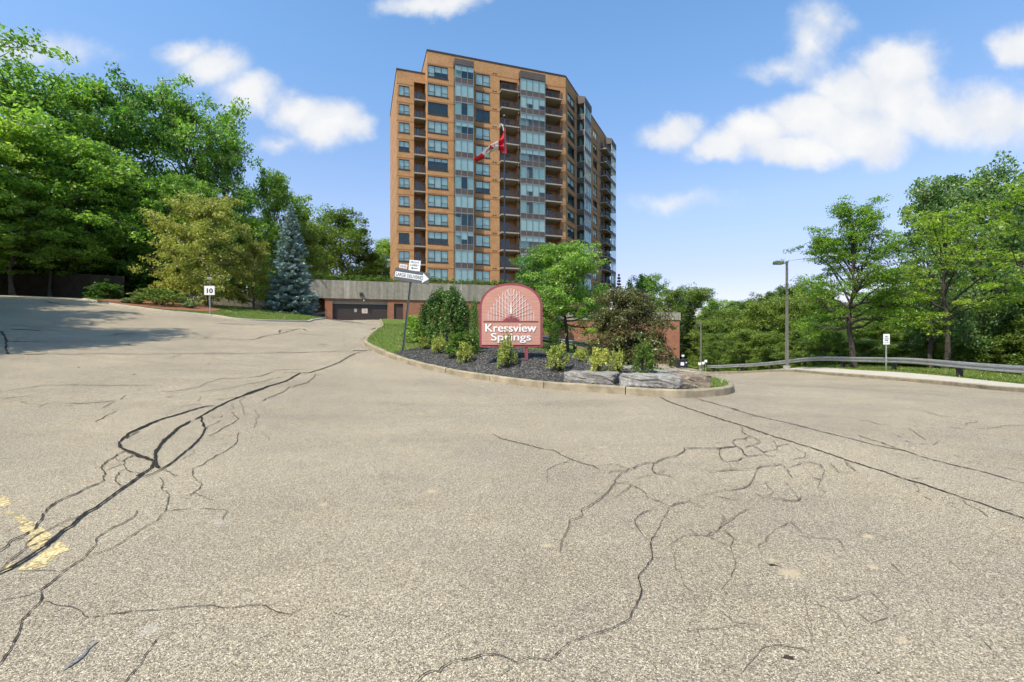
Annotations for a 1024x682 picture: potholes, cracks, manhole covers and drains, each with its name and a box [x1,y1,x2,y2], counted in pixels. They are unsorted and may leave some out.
crack [415,397,1024,682]
crack [0,317,376,670]
